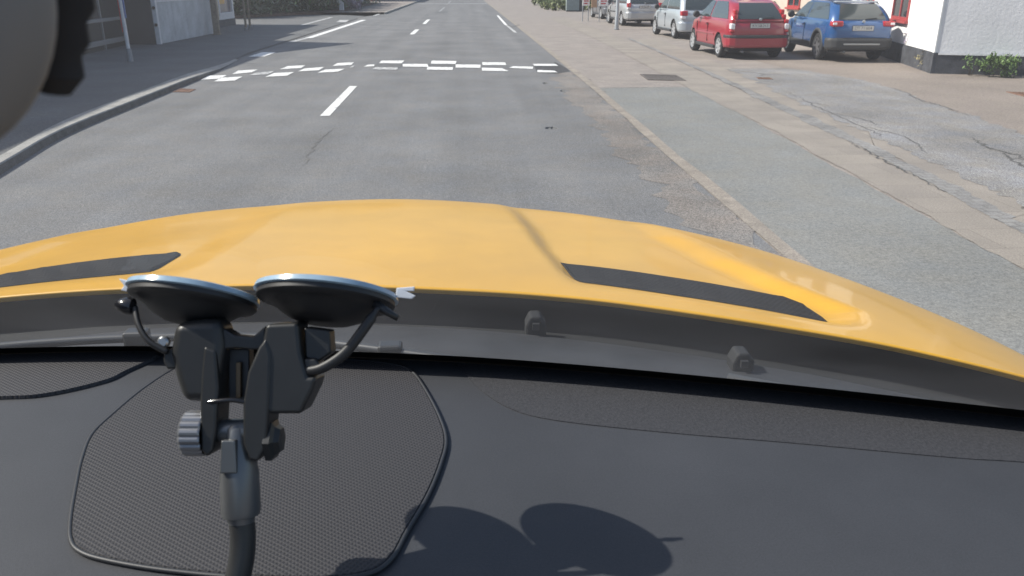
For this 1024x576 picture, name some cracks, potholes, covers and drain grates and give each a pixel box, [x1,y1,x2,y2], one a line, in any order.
crack [752,72,947,192]
crack [970,137,1024,167]
